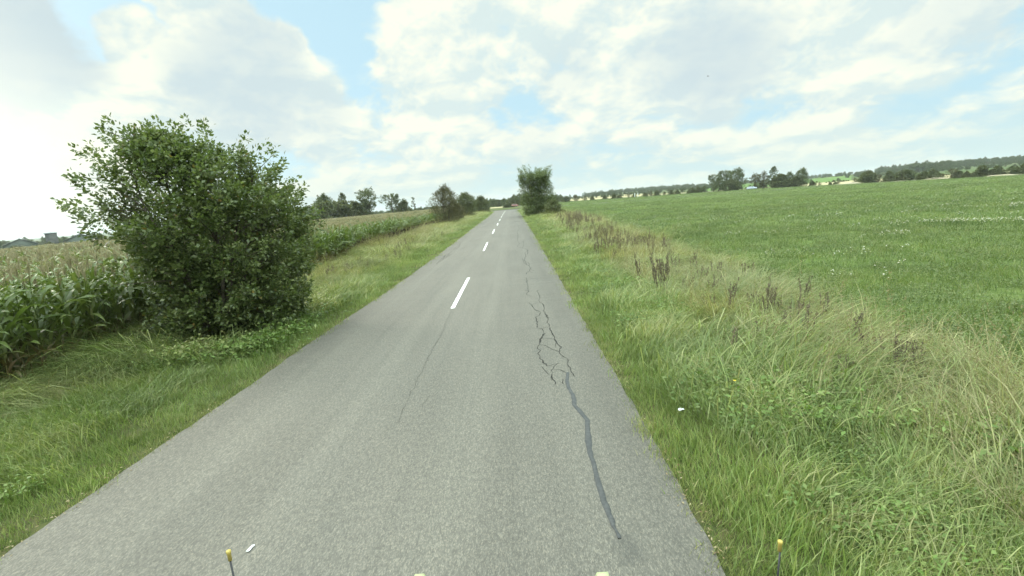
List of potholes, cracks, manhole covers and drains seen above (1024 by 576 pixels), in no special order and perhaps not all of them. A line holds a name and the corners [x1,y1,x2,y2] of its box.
crack [515,221,574,384]
